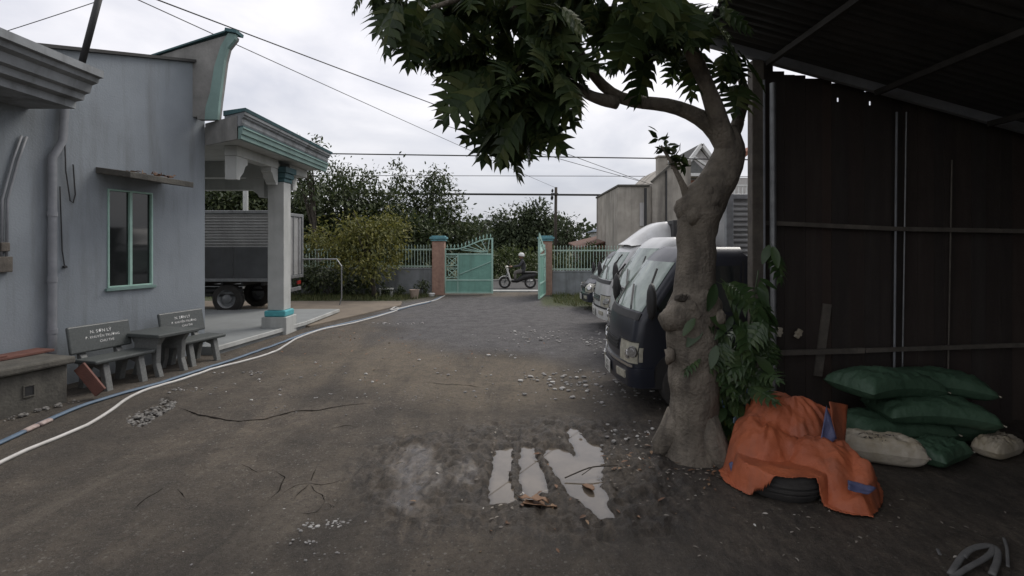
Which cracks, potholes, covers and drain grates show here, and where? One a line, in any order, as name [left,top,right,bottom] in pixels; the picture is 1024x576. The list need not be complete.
crack [236,462,347,515]
crack [177,402,378,430]
crack [124,483,189,517]
pothole [480,441,525,507]
pothole [518,440,556,506]
pothole [541,422,625,523]
